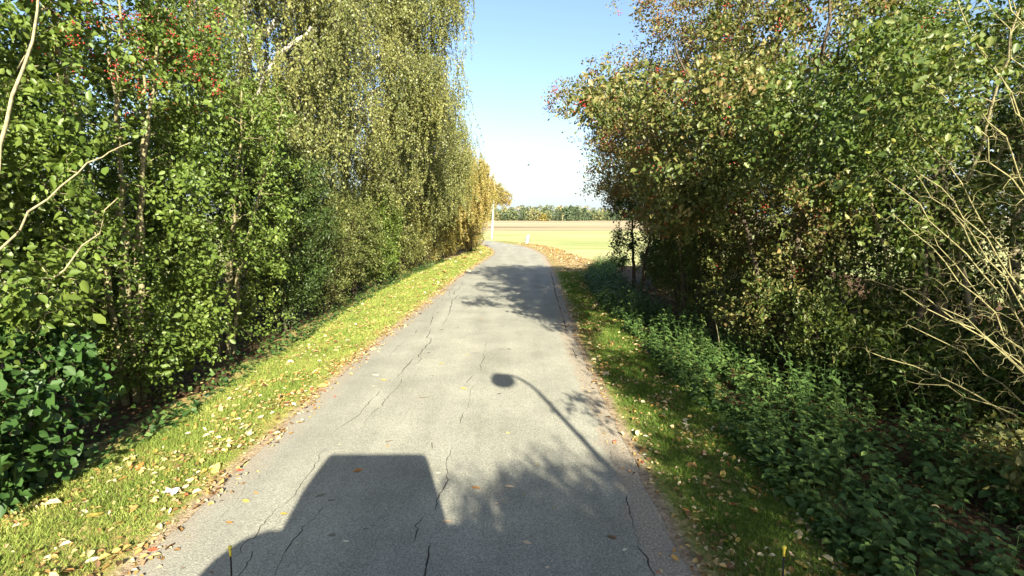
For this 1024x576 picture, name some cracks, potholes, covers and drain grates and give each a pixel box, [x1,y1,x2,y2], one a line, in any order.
crack [238,454,327,576]
crack [610,451,655,576]
crack [412,448,452,576]
crack [331,281,465,436]
